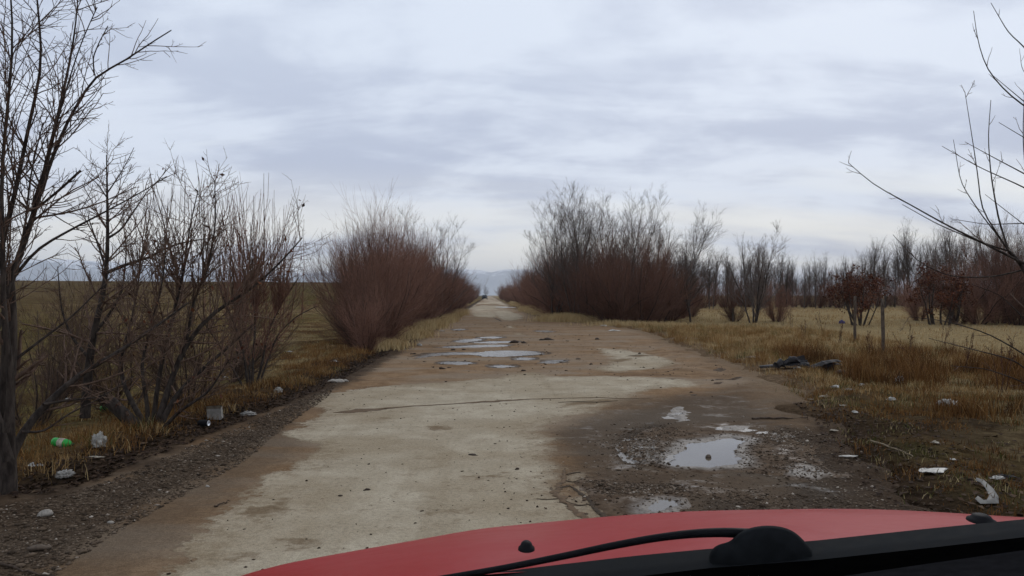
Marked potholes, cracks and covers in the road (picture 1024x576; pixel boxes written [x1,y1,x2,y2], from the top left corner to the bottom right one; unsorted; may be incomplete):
pothole [616,427,823,476]
pothole [667,406,691,422]
crack [536,468,608,519]
